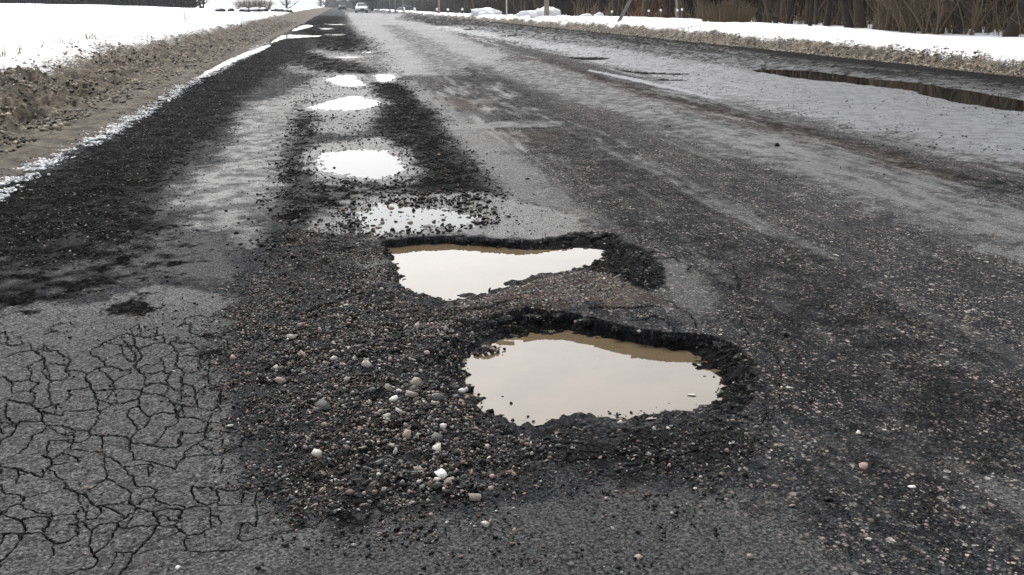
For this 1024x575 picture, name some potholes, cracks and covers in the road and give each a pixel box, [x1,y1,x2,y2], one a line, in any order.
pothole [384,232,666,305]
crack [652,251,684,264]
pothole [306,145,414,182]
crack [684,310,698,329]
pothole [301,94,387,112]
pothole [431,308,762,441]
crack [612,305,662,321]
crack [0,315,351,575]
pothole [326,74,370,88]
pothole [348,199,494,238]
pothole [372,73,396,83]
